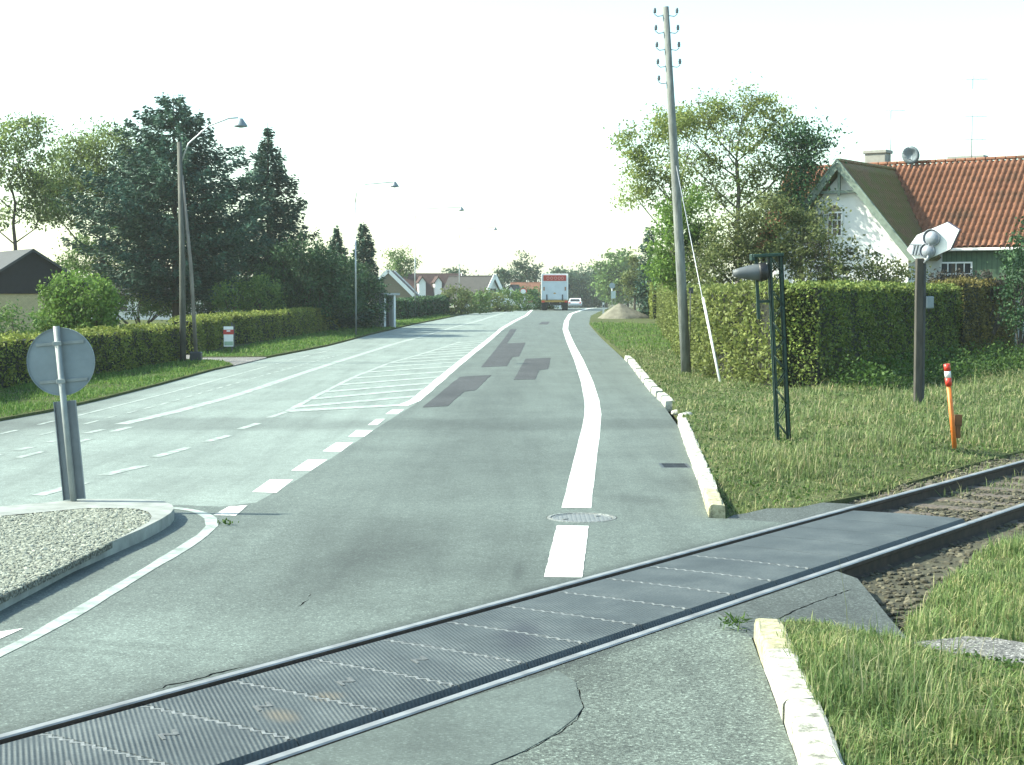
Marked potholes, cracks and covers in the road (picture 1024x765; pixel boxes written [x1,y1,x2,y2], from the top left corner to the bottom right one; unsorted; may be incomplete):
manhole cover [547,512,617,523]
crack [779,589,851,619]
crack [153,667,242,691]
crack [502,688,584,761]
